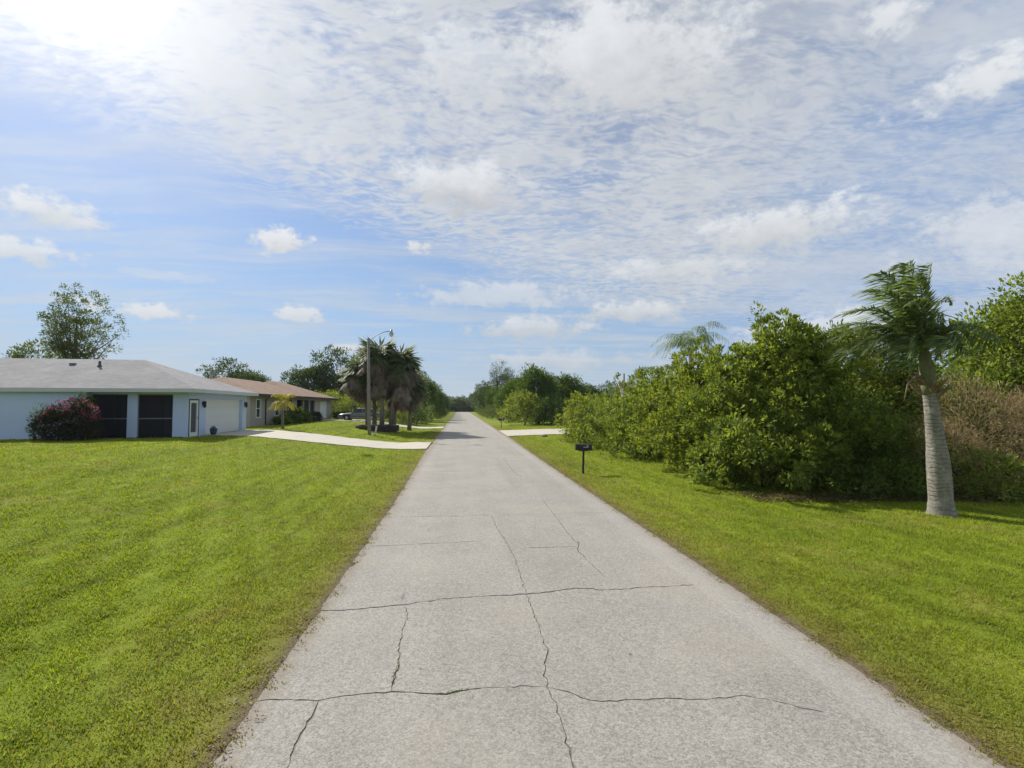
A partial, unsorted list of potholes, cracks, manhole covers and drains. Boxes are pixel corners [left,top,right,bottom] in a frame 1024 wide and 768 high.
crack [261,502,822,768]
